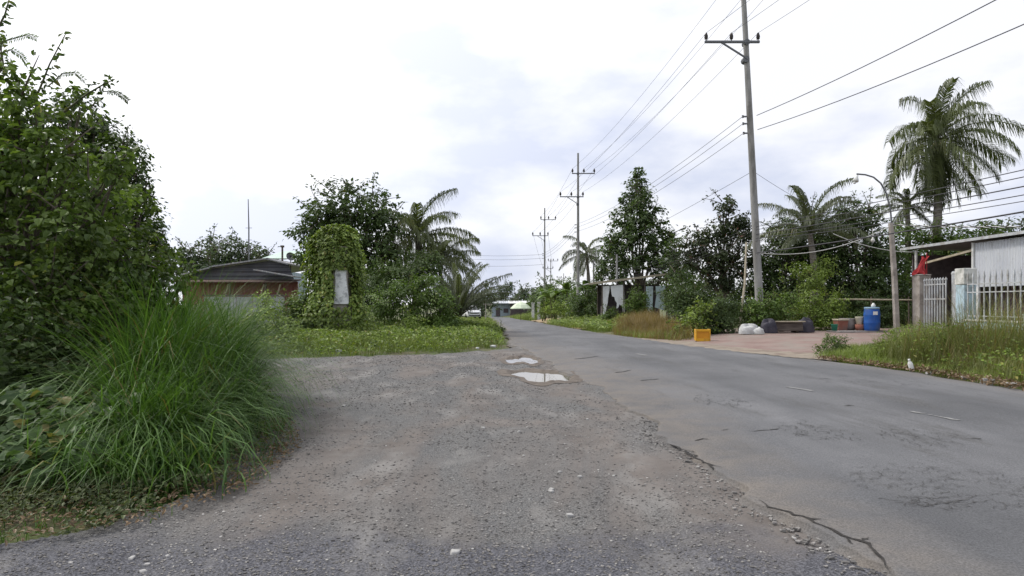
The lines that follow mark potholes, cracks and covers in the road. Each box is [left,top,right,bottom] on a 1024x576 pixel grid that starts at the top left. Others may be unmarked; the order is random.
crack [762,501,889,571]
crack [849,463,1024,510]
crack [667,438,720,469]
crack [724,419,861,440]
pothole [500,355,545,366]
pothole [497,368,583,386]
